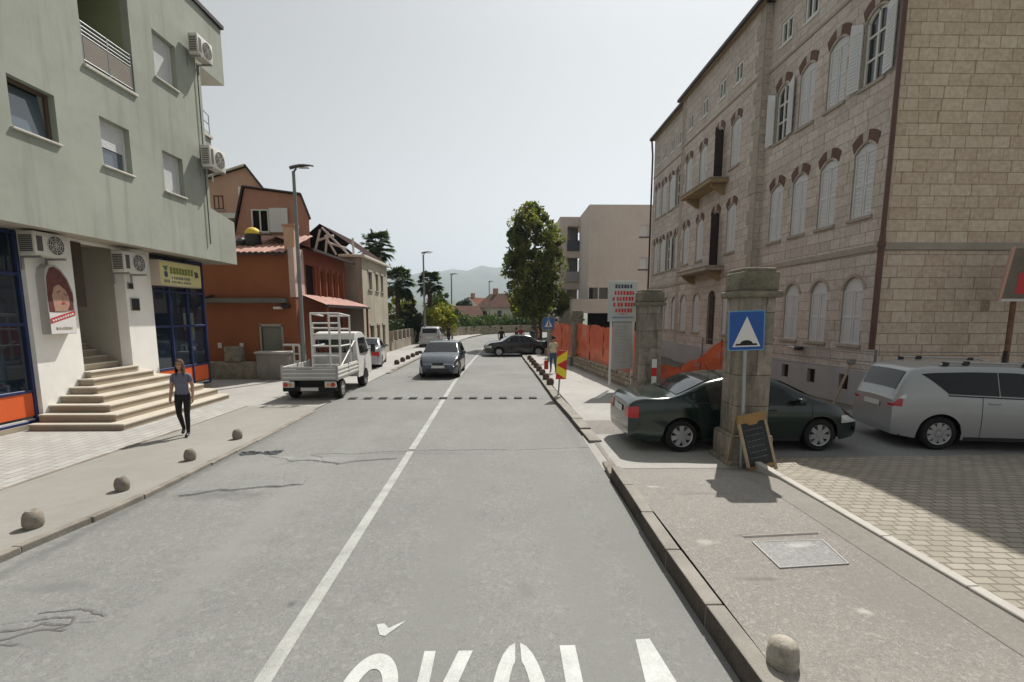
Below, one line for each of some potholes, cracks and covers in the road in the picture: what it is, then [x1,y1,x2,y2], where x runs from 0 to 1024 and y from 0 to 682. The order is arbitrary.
crack [180,455,393,497]
manhole cover [742,531,849,569]
crack [0,609,104,646]
